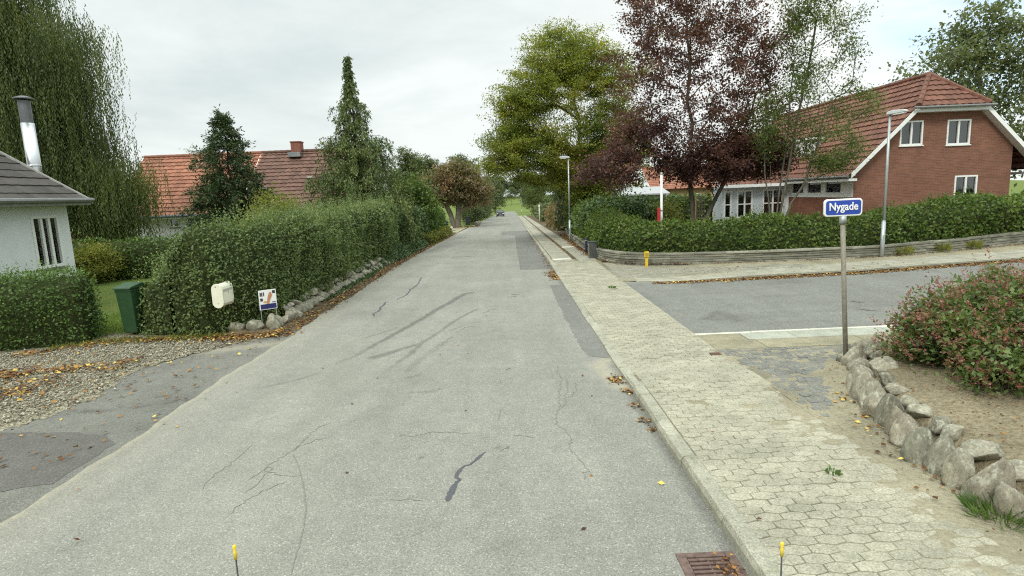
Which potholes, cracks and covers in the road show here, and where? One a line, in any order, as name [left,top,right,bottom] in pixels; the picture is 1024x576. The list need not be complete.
crack [203,424,327,574]
crack [555,364,590,480]
drain grate [675,551,748,576]
